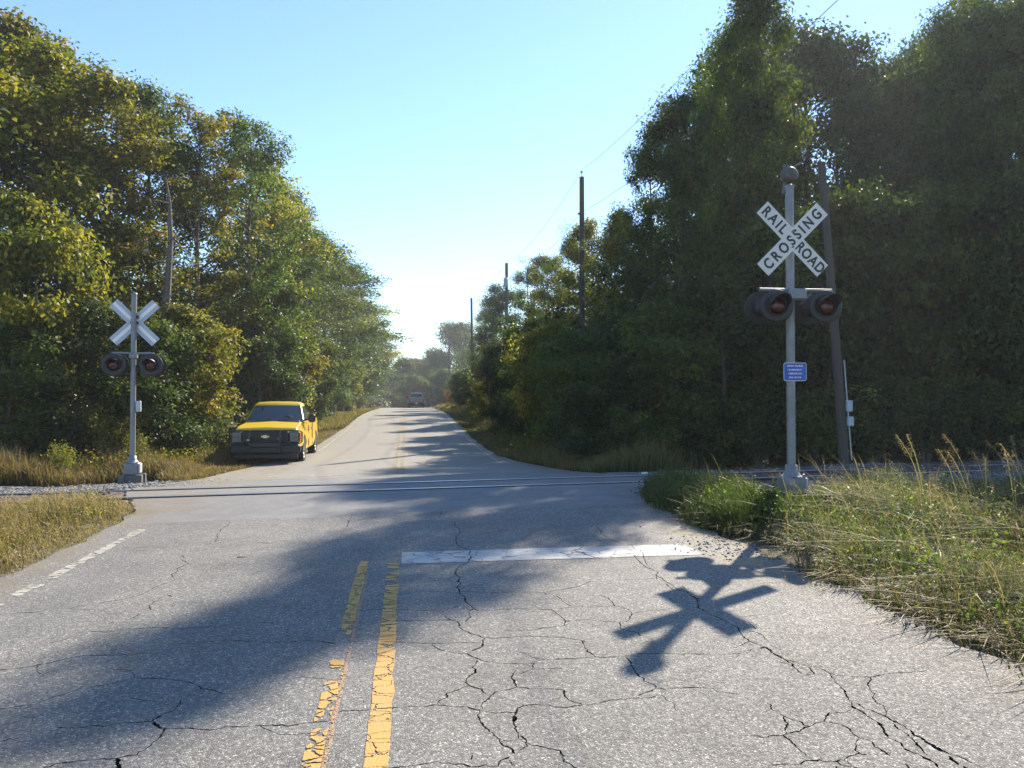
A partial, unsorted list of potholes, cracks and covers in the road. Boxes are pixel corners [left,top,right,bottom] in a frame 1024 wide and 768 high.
crack [340,511,740,768]
crack [584,511,982,768]
crack [0,555,335,768]
